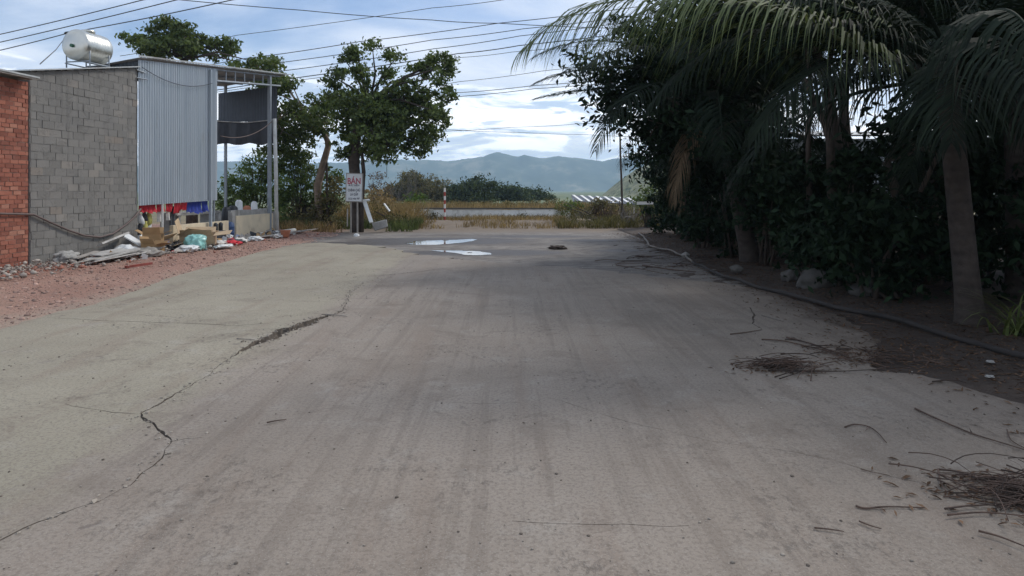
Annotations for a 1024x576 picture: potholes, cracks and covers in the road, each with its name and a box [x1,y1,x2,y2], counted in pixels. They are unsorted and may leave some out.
crack [518,519,683,530]
crack [0,281,367,541]
